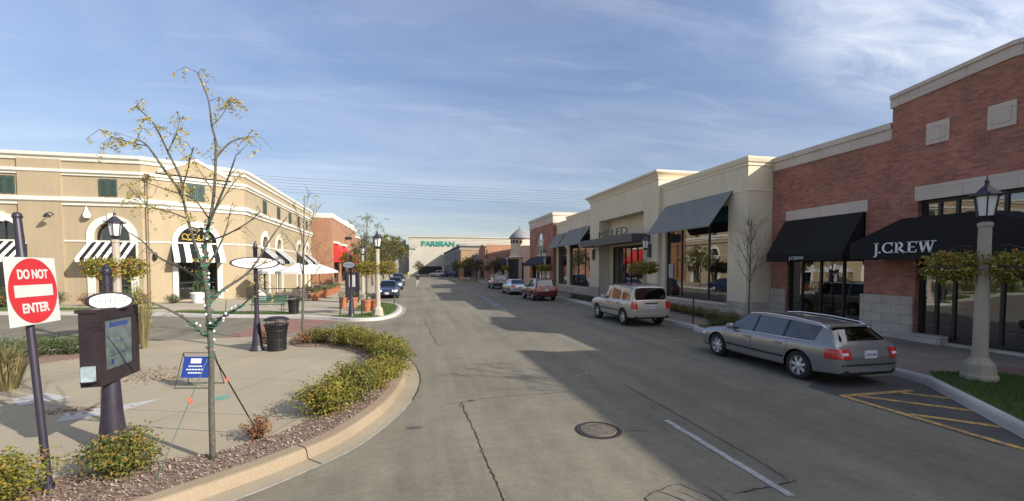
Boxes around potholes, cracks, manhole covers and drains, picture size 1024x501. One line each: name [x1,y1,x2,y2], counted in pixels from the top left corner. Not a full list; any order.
manhole cover [575,422,622,439]
crack [644,480,796,501]
crack [452,391,569,501]
